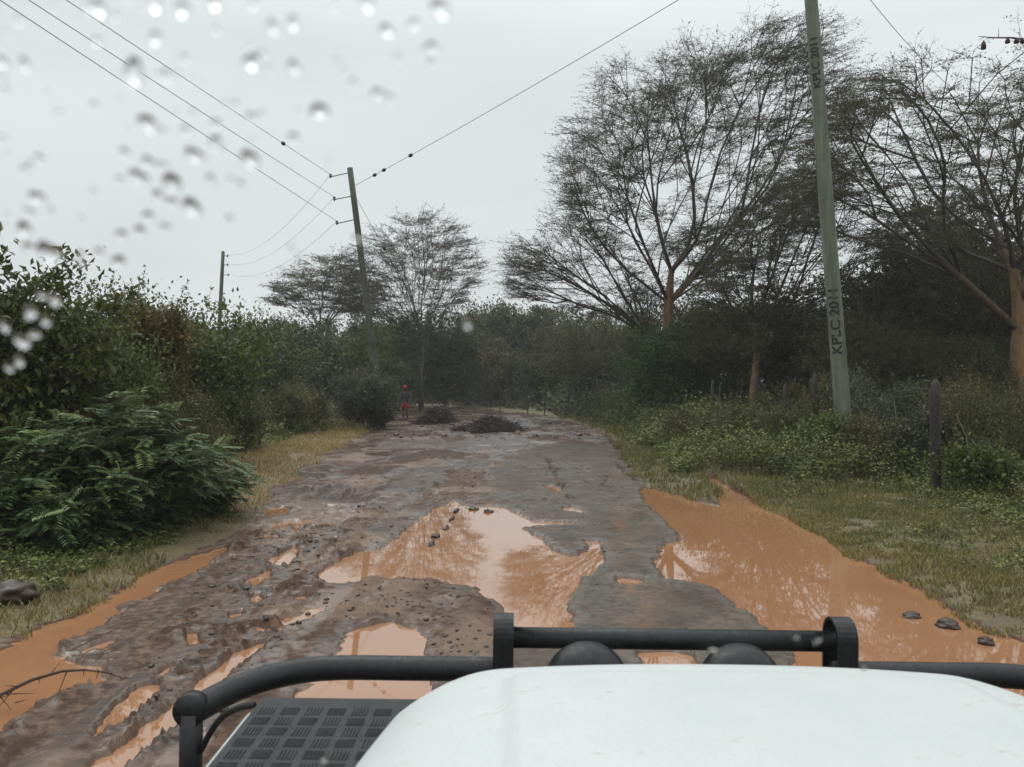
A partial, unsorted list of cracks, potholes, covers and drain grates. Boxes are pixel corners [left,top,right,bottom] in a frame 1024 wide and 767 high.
pothole [260,541,305,566]
pothole [285,616,437,699]
pothole [235,563,276,587]
pothole [542,483,566,493]
pothole [171,661,204,678]
pothole [180,624,211,646]
pothole [148,658,185,676]
pothole [312,499,610,628]
pothole [85,674,167,737]
pothole [637,472,1024,696]
pothole [612,573,650,585]
